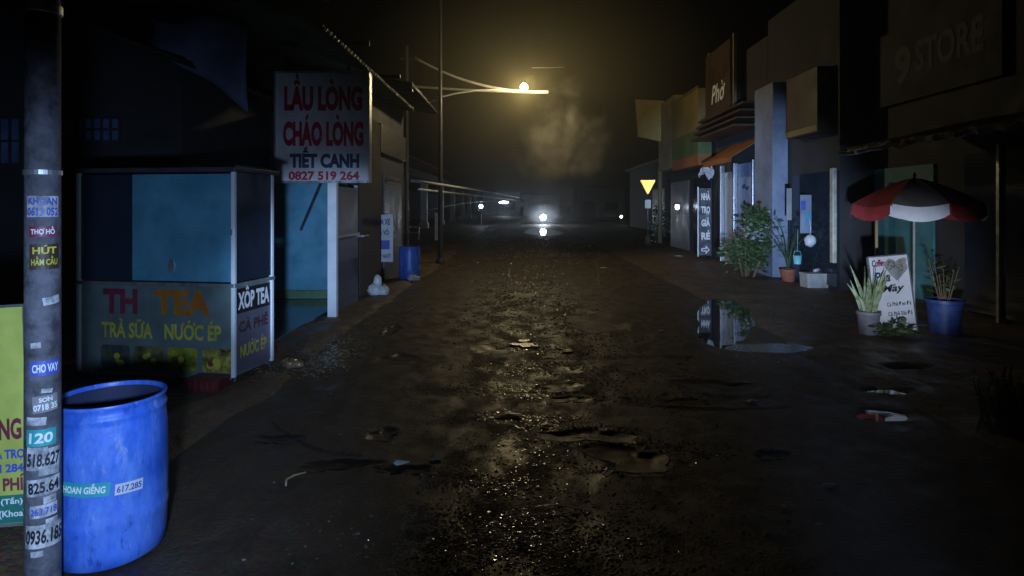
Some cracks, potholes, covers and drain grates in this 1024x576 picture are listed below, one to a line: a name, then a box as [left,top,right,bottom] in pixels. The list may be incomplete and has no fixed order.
pothole [582,443,669,473]
pothole [373,465,431,474]
pothole [549,395,593,403]
pothole [537,428,637,443]
pothole [542,382,585,392]
pothole [756,450,793,459]
pothole [297,458,387,472]
pothole [366,427,398,442]
